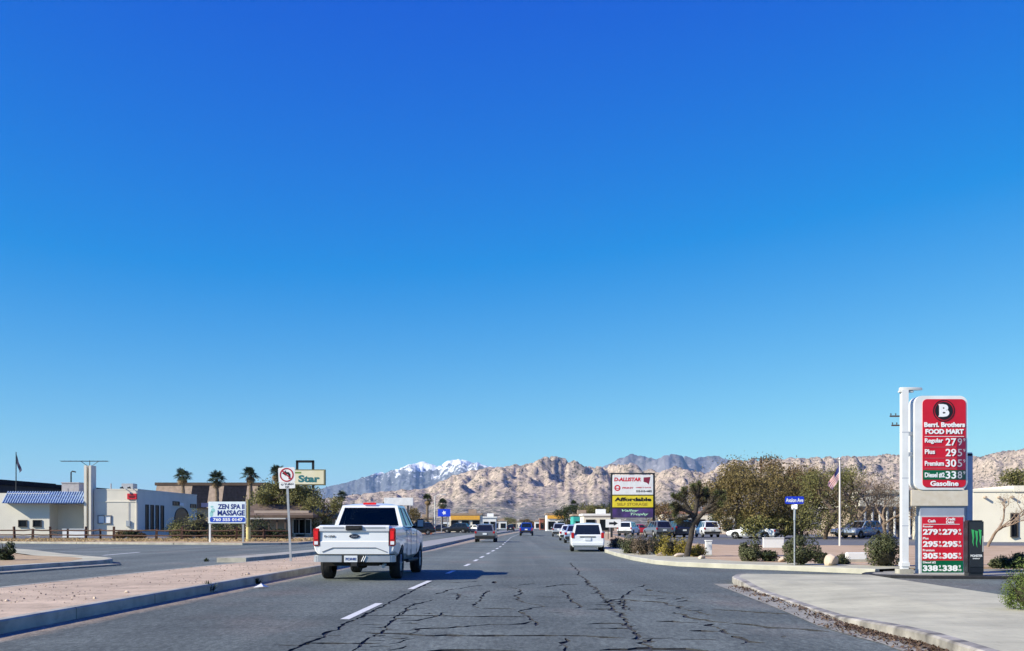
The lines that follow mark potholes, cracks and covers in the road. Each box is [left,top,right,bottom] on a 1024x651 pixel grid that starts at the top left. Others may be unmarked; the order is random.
crack [306,562,829,651]
